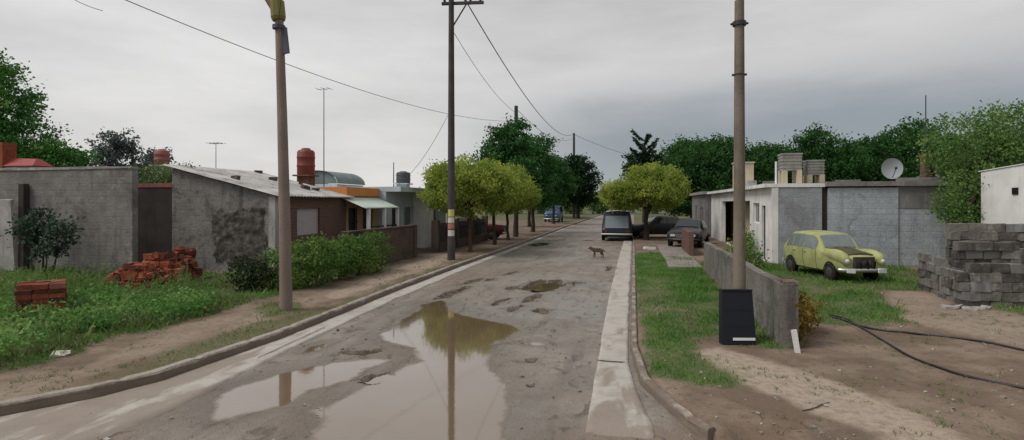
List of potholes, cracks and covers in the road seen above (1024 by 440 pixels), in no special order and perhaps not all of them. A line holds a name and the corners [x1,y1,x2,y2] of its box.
pothole [357,371,394,383]
pothole [518,279,563,293]
pothole [434,286,472,300]
